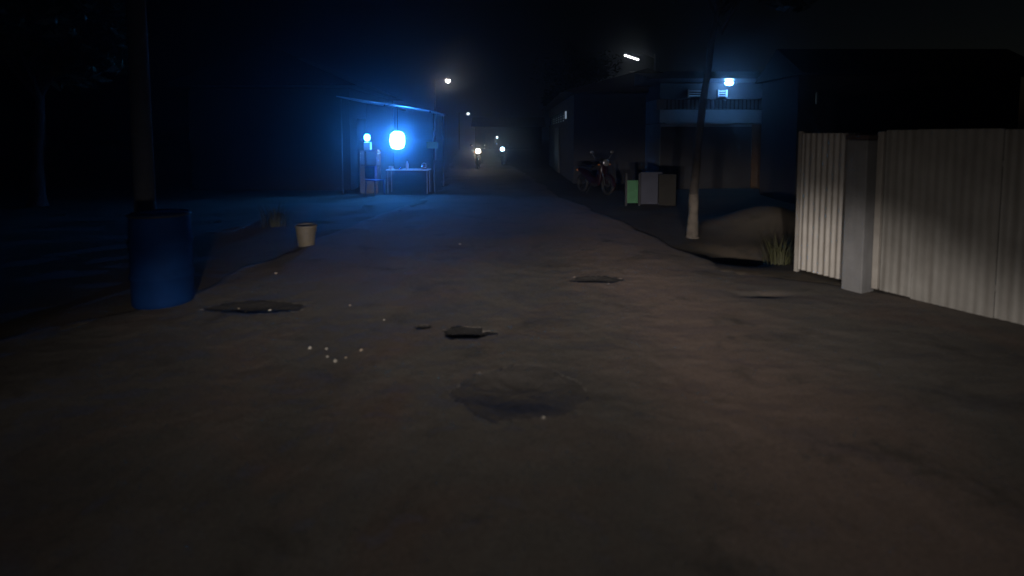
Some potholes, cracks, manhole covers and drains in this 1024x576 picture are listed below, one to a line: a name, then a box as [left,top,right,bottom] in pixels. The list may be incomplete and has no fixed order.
pothole [451,365,589,422]
pothole [442,326,497,339]
pothole [203,300,304,314]
